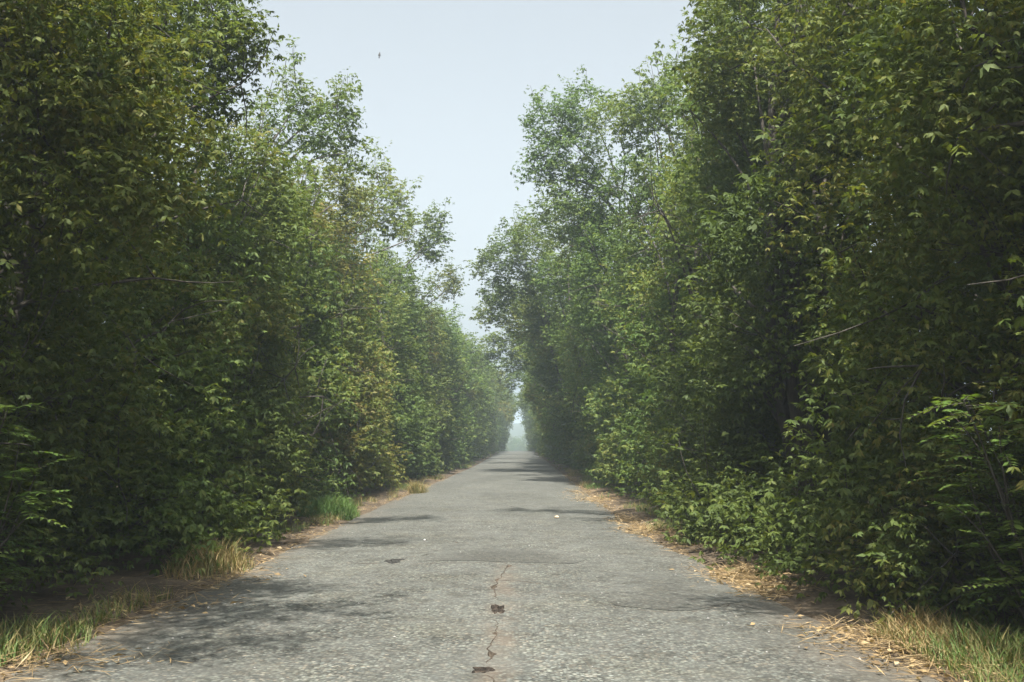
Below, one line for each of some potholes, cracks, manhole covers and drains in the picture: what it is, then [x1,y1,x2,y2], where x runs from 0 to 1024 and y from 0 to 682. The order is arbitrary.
pothole [491,604,505,614]
crack [365,554,760,682]
